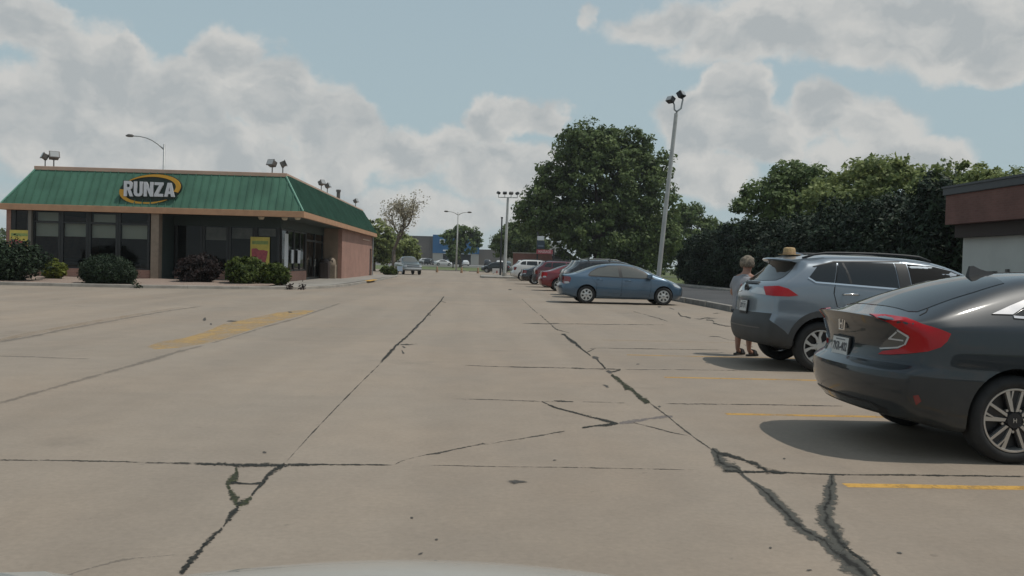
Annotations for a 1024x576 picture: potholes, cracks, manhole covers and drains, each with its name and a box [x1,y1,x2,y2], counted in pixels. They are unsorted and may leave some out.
crack [3,443,684,574]
crack [477,299,1022,576]
